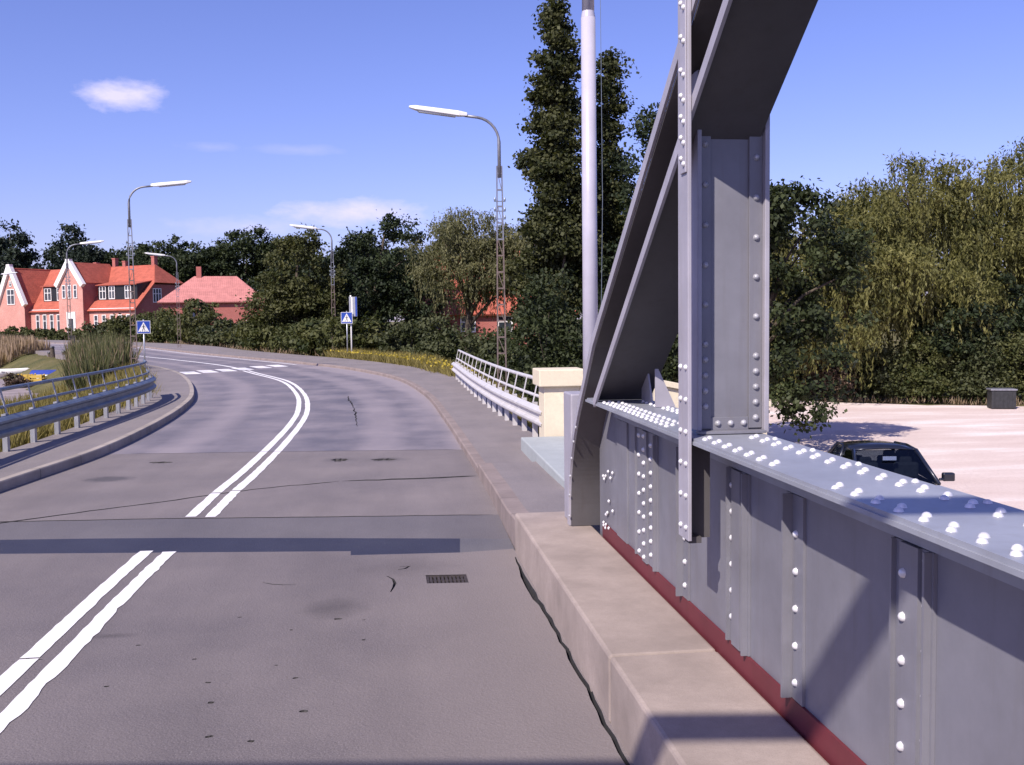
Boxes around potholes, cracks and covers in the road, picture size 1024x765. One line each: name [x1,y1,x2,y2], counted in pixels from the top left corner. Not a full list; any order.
crack [515,558,630,765]
crack [387,566,410,592]
